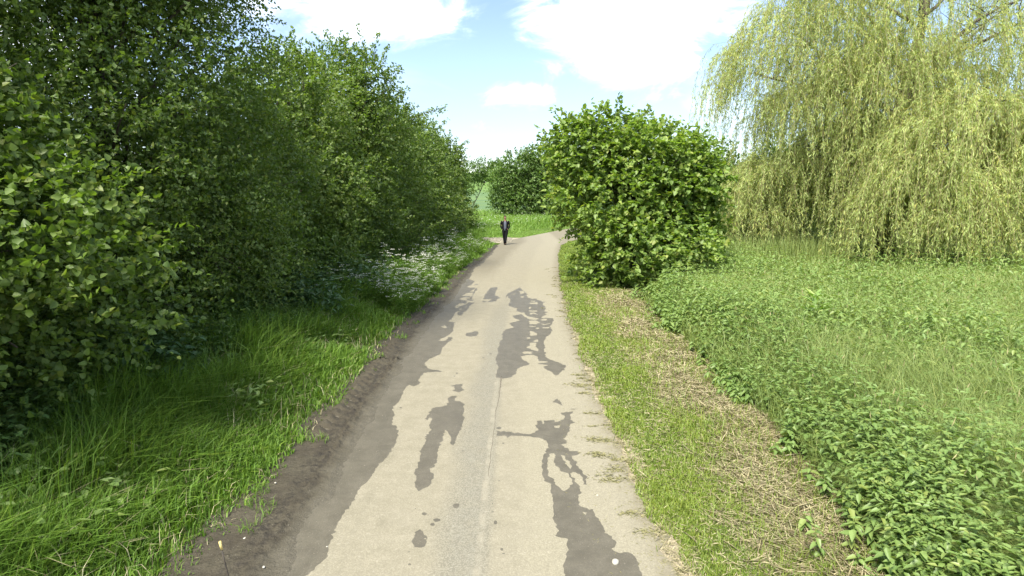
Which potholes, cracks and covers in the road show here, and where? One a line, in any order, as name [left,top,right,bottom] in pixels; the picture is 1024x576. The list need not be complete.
crack [488,377,502,475]
